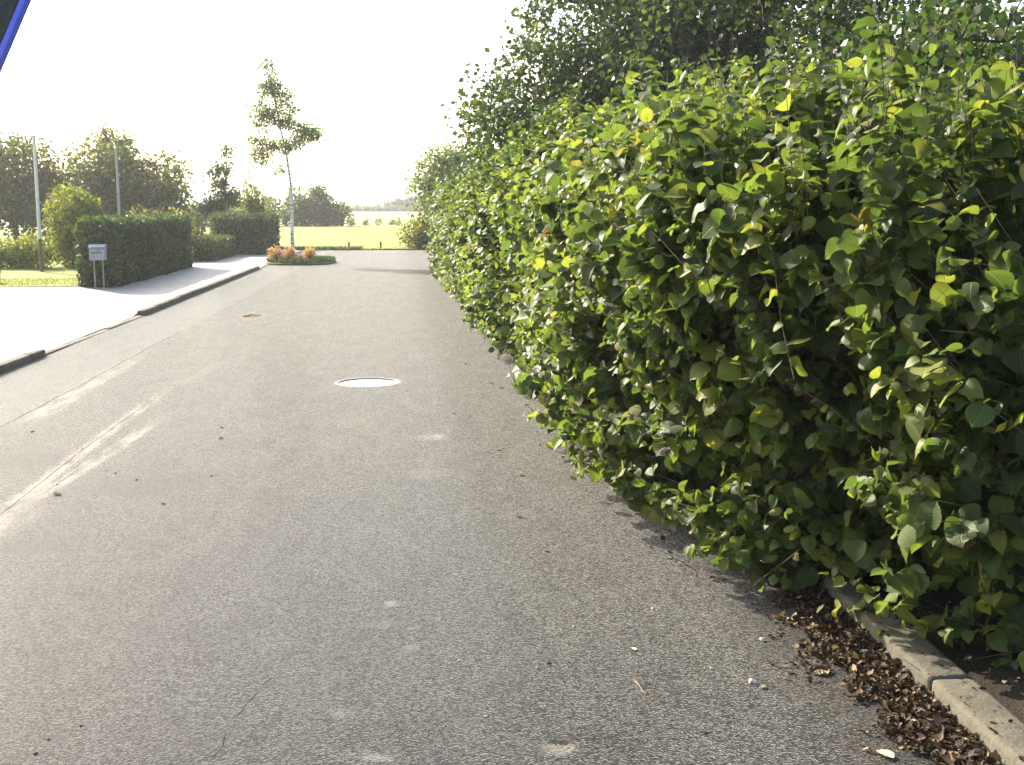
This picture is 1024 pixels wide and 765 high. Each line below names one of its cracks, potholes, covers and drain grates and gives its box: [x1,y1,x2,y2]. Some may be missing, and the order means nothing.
manhole cover [335,377,401,387]
crack [209,678,272,762]
